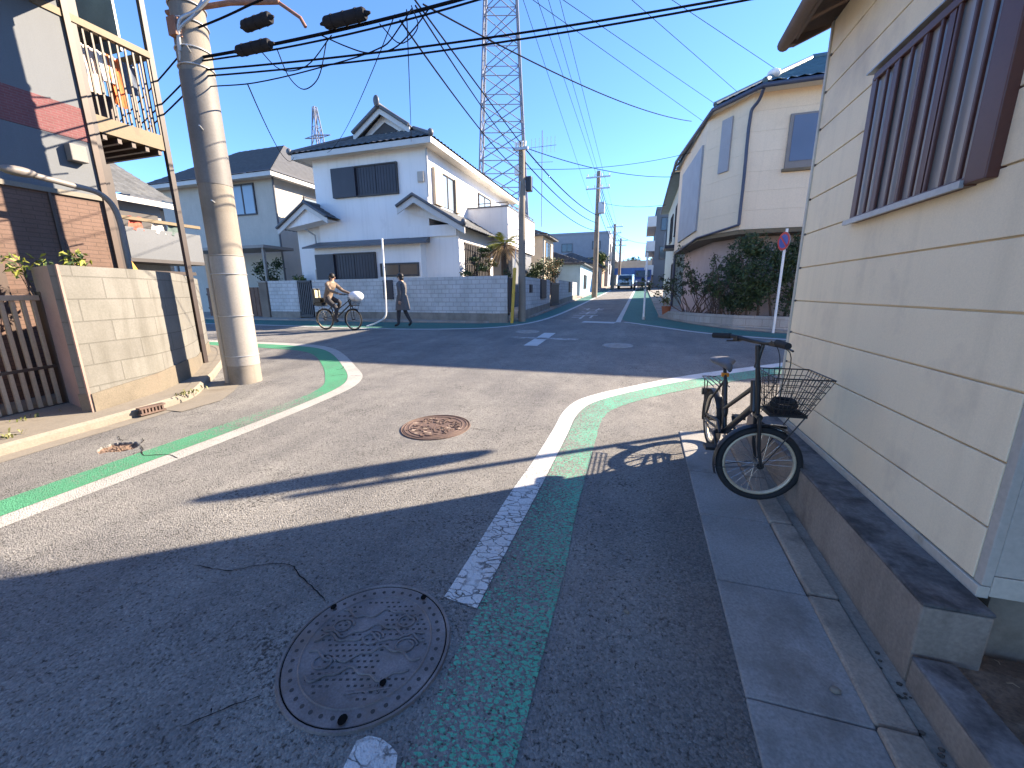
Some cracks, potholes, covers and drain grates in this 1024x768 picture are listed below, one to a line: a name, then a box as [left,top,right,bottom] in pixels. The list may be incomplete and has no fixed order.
manhole cover [275,584,450,736]
crack [197,563,325,600]
pothole [97,441,140,454]
manhole cover [401,415,470,440]
crack [183,695,261,726]
drain grate [136,402,167,416]
